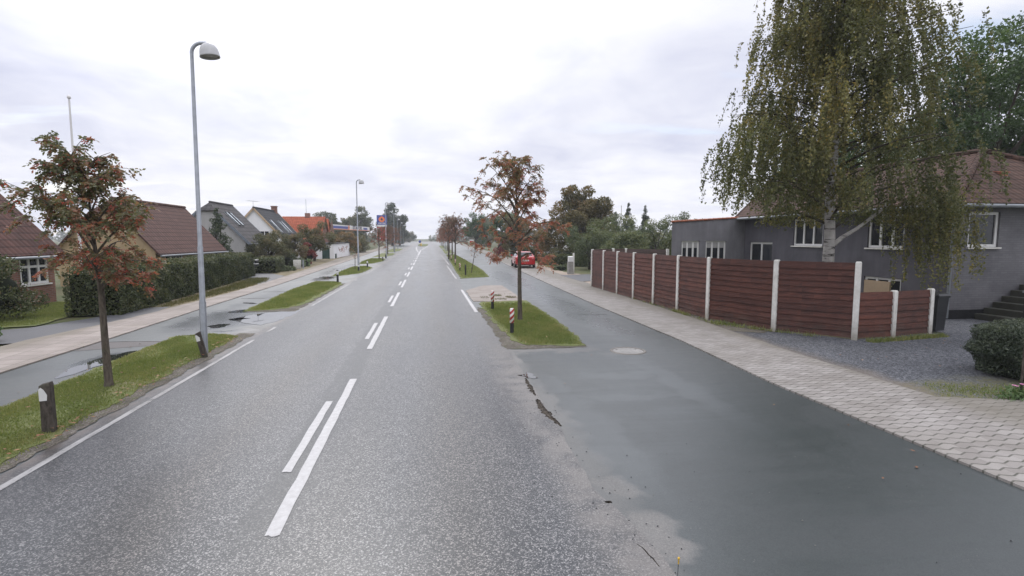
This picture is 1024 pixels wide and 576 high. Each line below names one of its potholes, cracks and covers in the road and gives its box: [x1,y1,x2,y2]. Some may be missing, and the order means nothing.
manhole cover [610,347,646,355]
